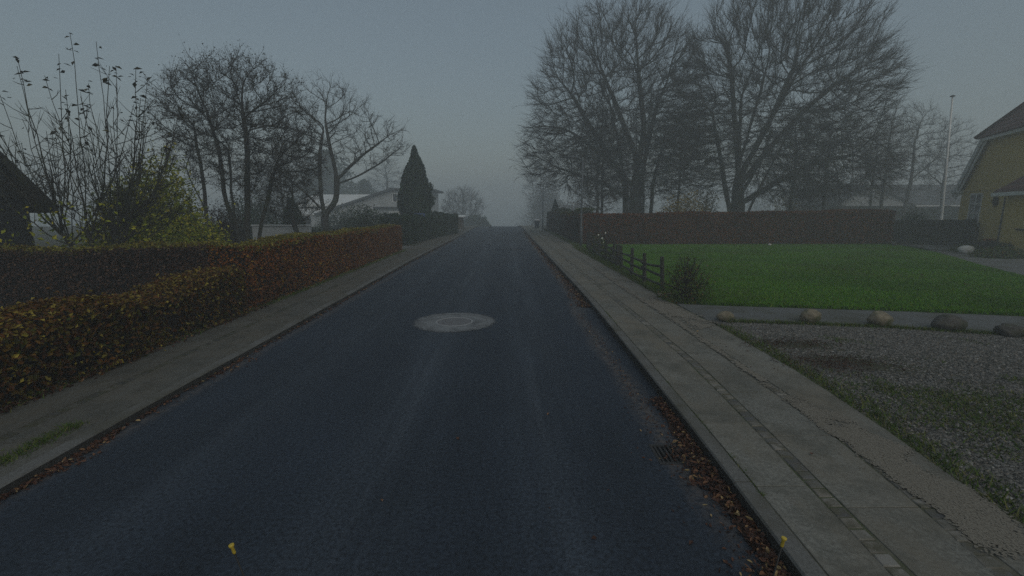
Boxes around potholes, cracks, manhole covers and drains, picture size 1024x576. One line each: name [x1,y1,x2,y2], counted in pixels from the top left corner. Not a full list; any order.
drain grate [648,444,690,464]
manhole cover [414,312,498,333]
